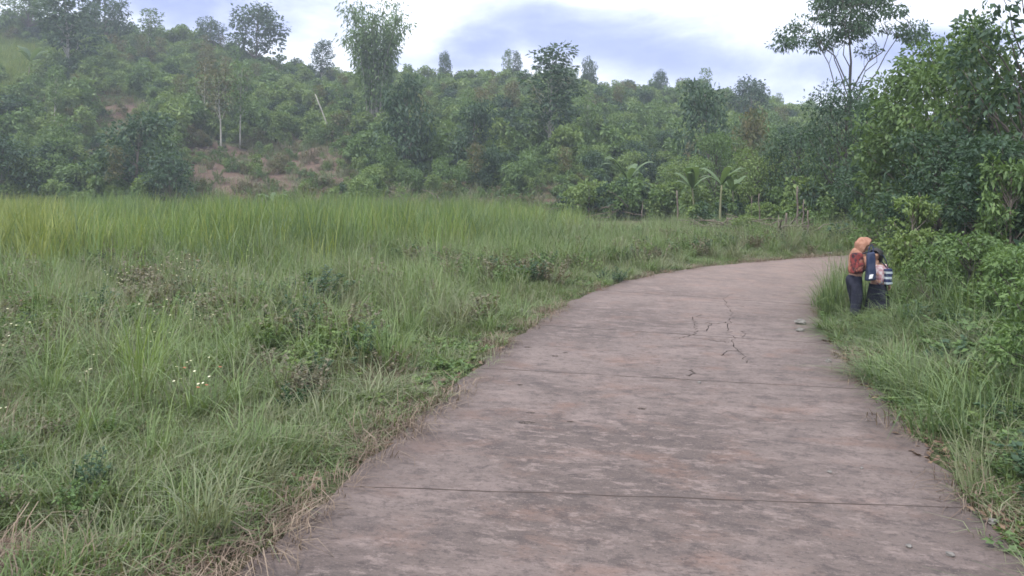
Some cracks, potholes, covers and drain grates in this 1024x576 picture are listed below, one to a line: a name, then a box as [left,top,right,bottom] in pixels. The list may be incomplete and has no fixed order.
crack [679,297,748,363]
